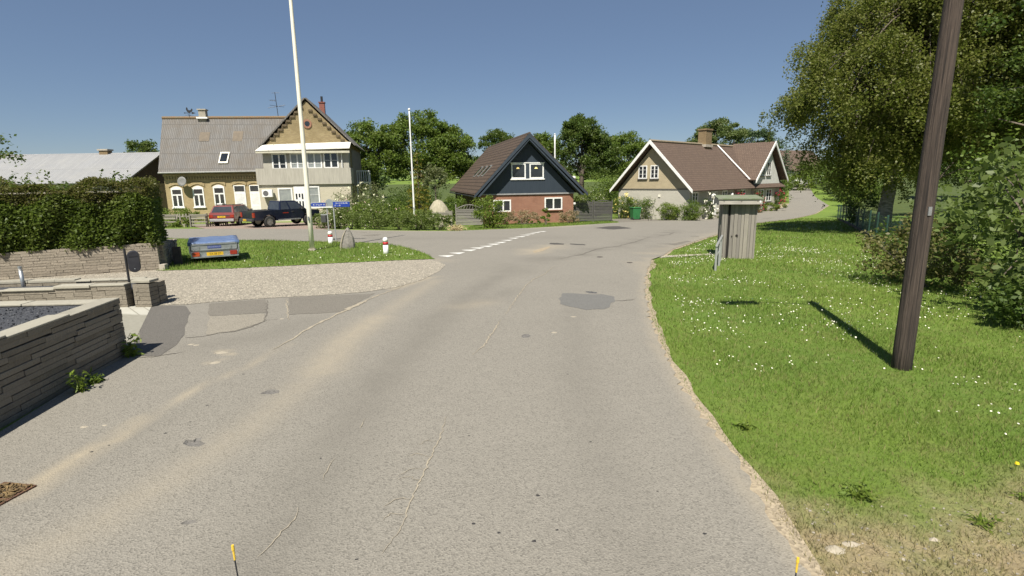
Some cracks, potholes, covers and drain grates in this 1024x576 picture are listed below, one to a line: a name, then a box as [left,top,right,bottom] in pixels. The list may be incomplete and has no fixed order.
crack [382,417,446,553]
crack [134,285,404,358]
pothole [183,437,205,447]
drain grate [0,482,37,506]
